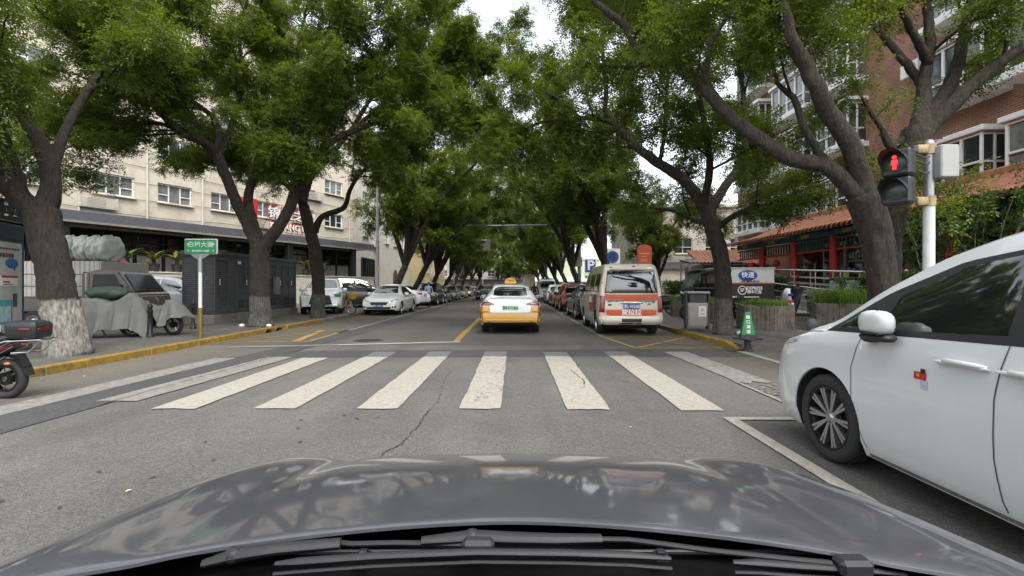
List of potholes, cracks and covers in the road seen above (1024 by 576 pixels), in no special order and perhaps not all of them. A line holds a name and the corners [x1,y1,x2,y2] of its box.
crack [380,367,451,457]
